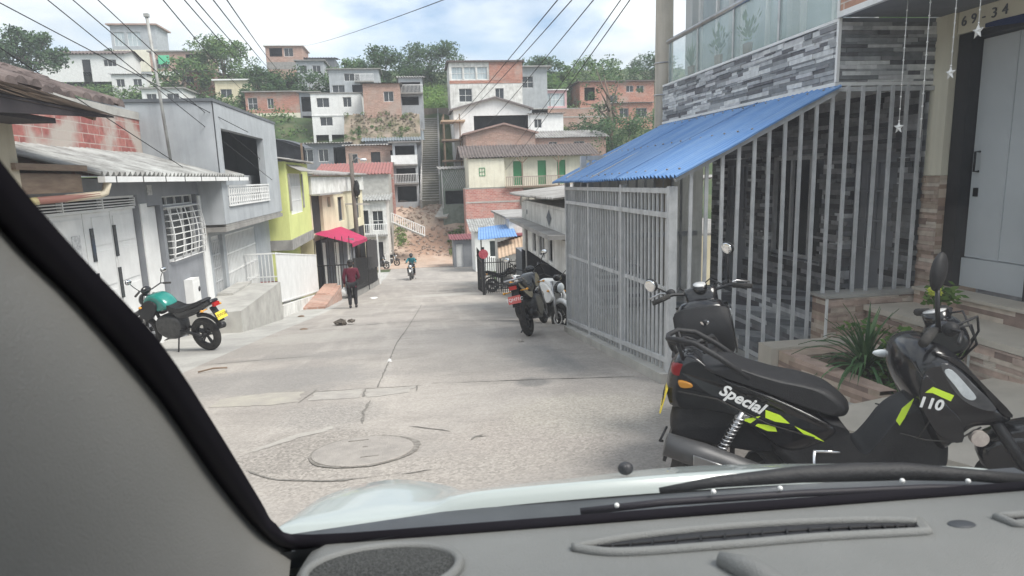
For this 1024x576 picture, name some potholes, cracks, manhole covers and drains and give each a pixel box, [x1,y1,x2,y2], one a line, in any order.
manhole cover [308,435,421,468]
crack [298,304,499,423]
